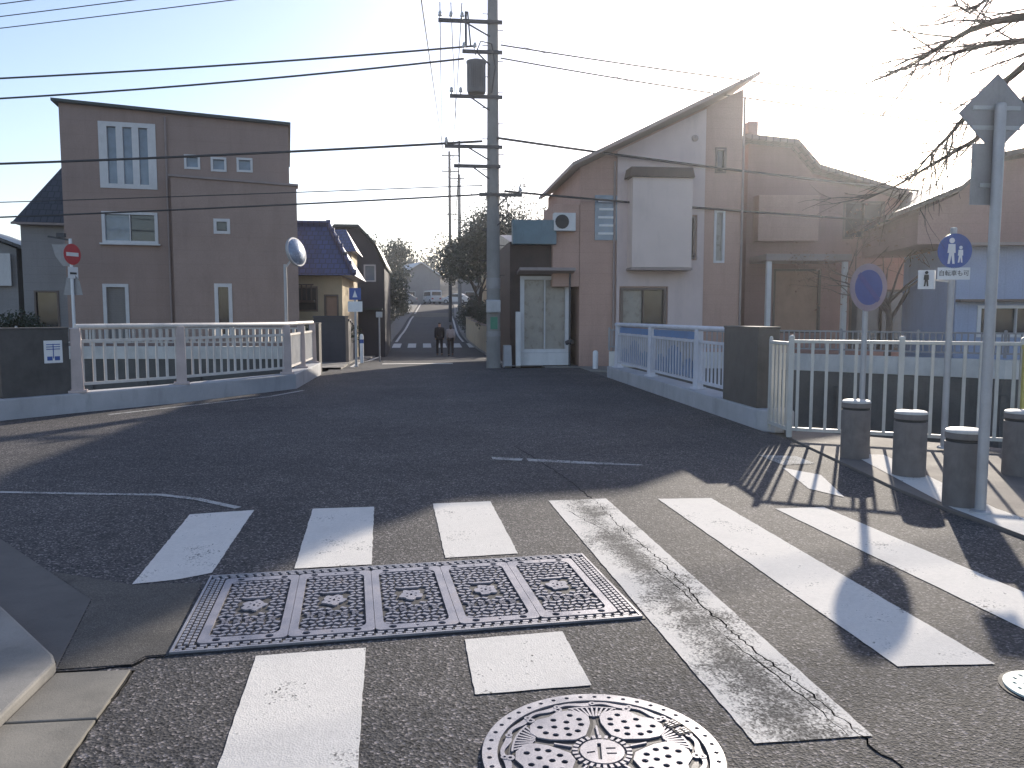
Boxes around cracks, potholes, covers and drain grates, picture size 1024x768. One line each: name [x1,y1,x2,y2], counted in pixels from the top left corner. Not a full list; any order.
manhole cover [166,553,646,657]
manhole cover [998,670,1024,700]
manhole cover [480,694,728,768]
crack [514,446,904,768]
